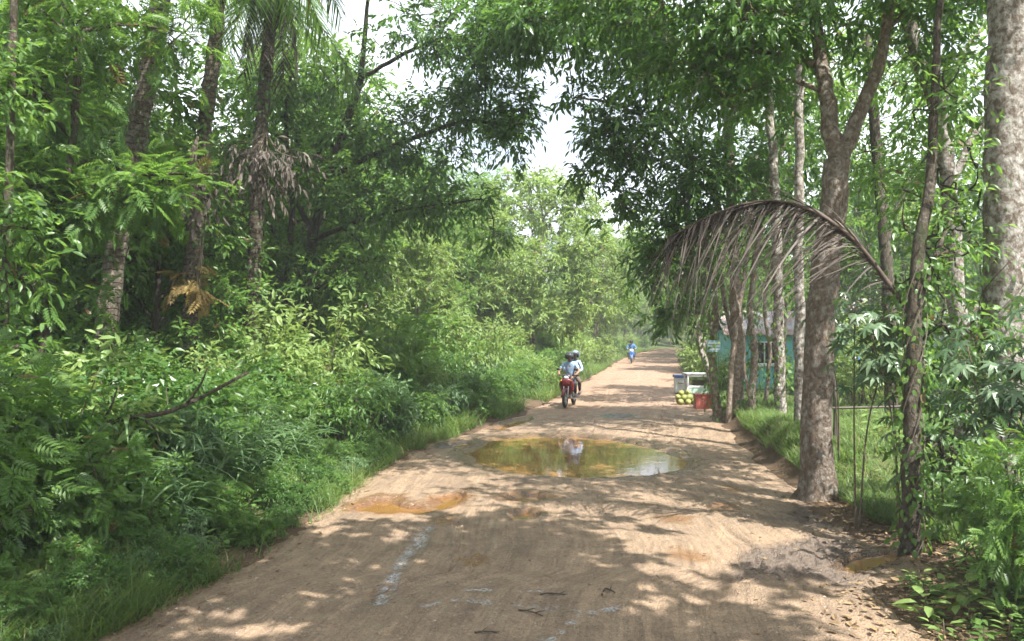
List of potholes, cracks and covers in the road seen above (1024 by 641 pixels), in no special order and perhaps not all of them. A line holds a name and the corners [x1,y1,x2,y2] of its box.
pothole [839,549,901,572]
pothole [506,508,541,519]
pothole [454,434,700,478]
pothole [344,489,472,514]
